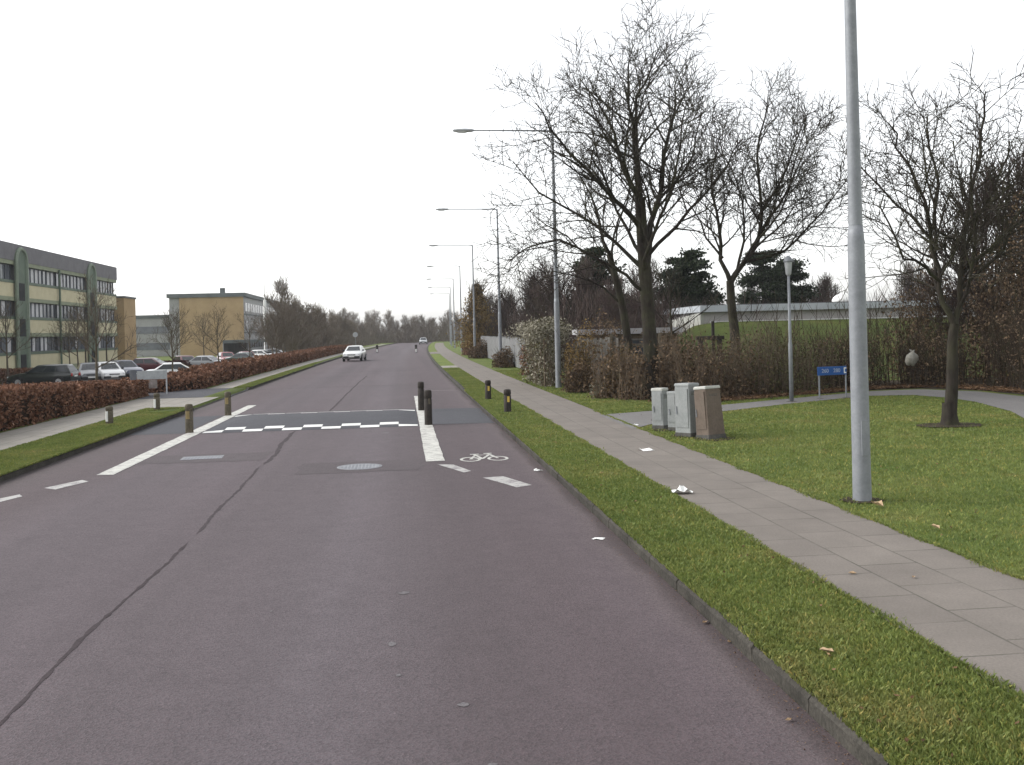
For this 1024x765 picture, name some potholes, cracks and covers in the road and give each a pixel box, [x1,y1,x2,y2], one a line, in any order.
crack [0,467,259,726]
